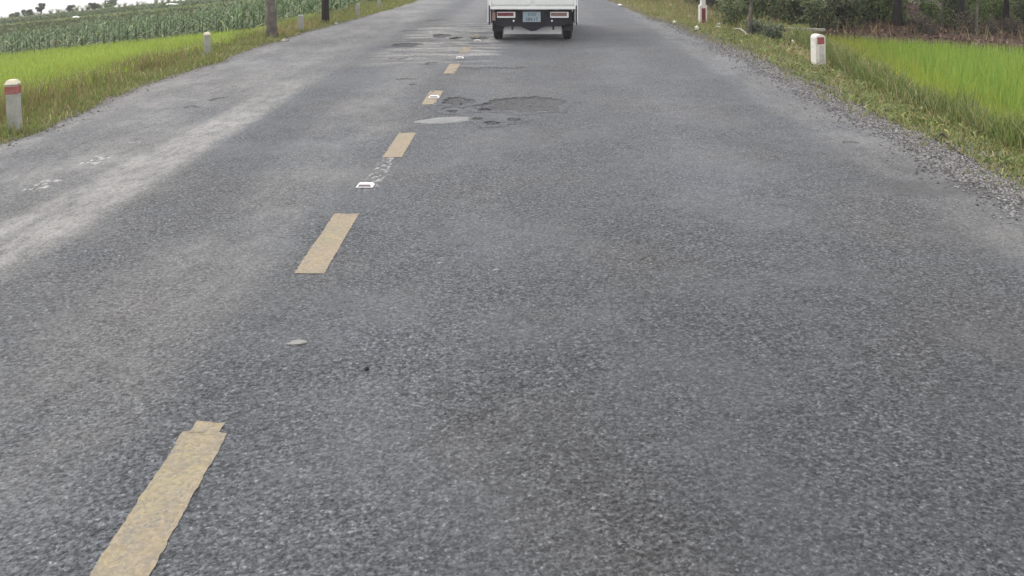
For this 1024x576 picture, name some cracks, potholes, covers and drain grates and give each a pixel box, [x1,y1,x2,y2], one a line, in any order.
pothole [464,94,576,115]
pothole [433,95,487,107]
pothole [497,116,532,124]
pothole [472,119,512,127]
